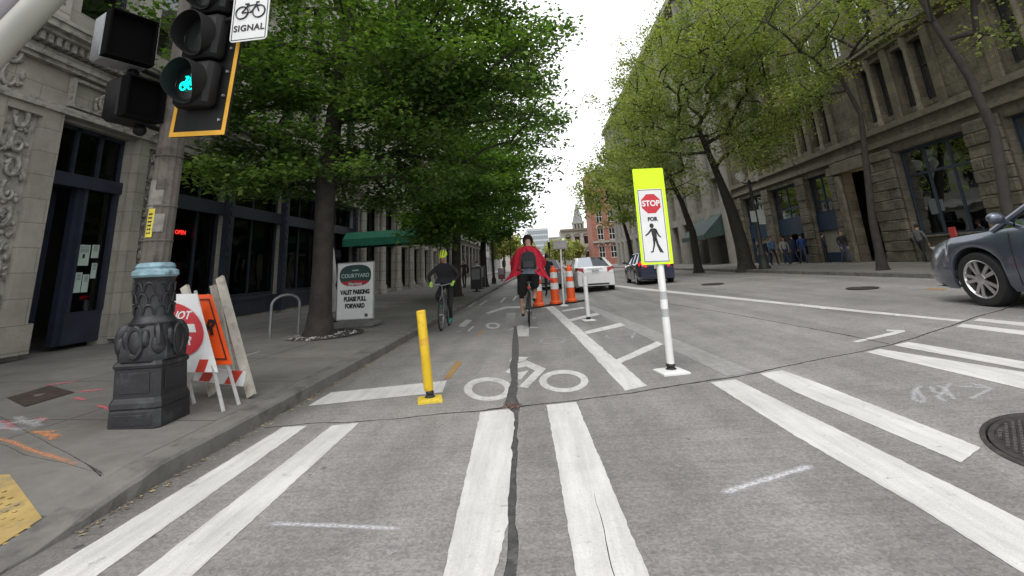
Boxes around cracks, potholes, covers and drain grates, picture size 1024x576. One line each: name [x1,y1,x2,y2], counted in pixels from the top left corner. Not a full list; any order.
crack [594,495,615,576]
utility cover [8,385,73,406]
manhole cover [979,413,1024,466]
